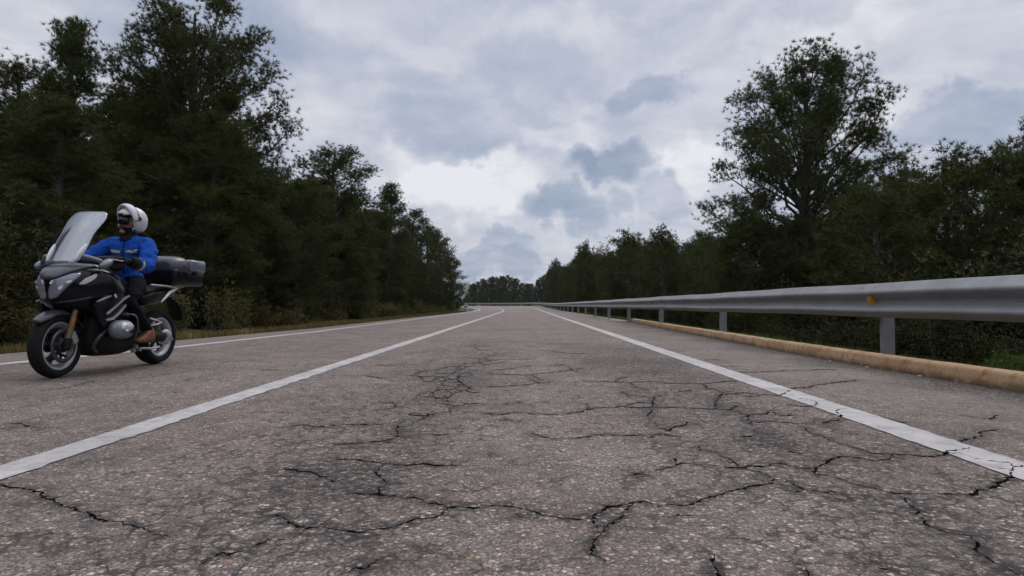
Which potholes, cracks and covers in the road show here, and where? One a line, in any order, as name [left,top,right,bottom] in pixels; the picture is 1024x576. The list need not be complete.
crack [0,484,168,537]
crack [293,344,844,448]
crack [199,415,1024,576]
